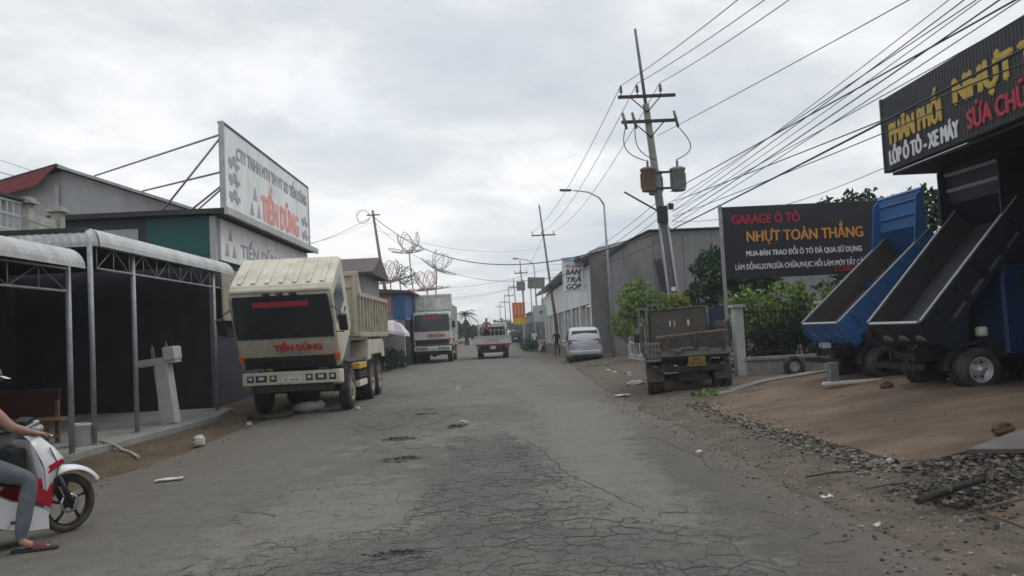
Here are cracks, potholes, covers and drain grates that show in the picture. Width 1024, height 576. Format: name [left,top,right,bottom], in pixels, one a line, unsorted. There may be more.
crack [170,433,877,576]
crack [353,398,533,452]
pothole [374,454,422,463]
pothole [362,548,437,560]
